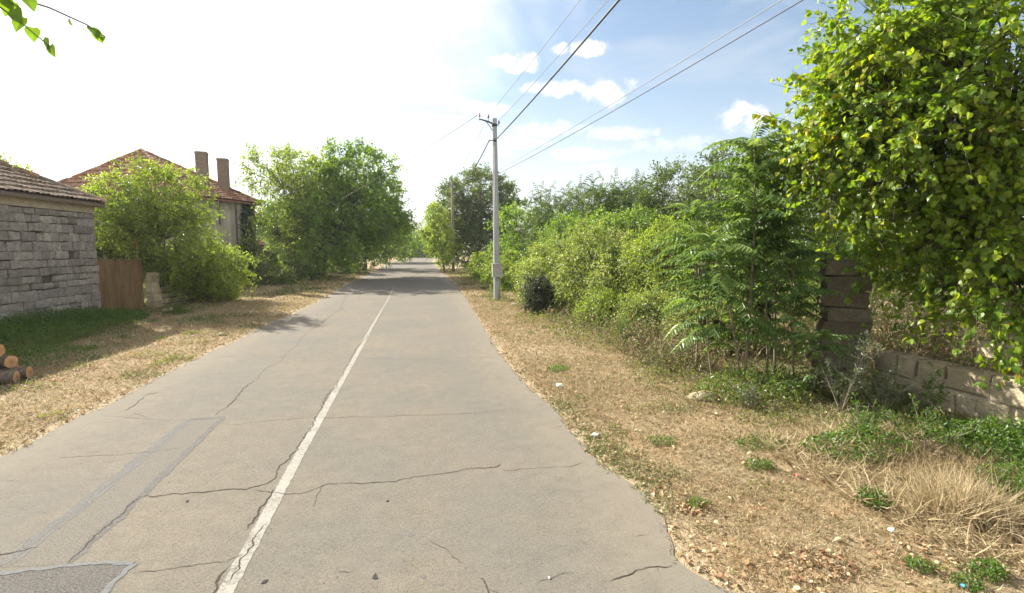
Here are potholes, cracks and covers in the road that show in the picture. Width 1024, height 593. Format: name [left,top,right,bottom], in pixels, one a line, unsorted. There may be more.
crack [68,294,582,562]
crack [608,565,671,581]
